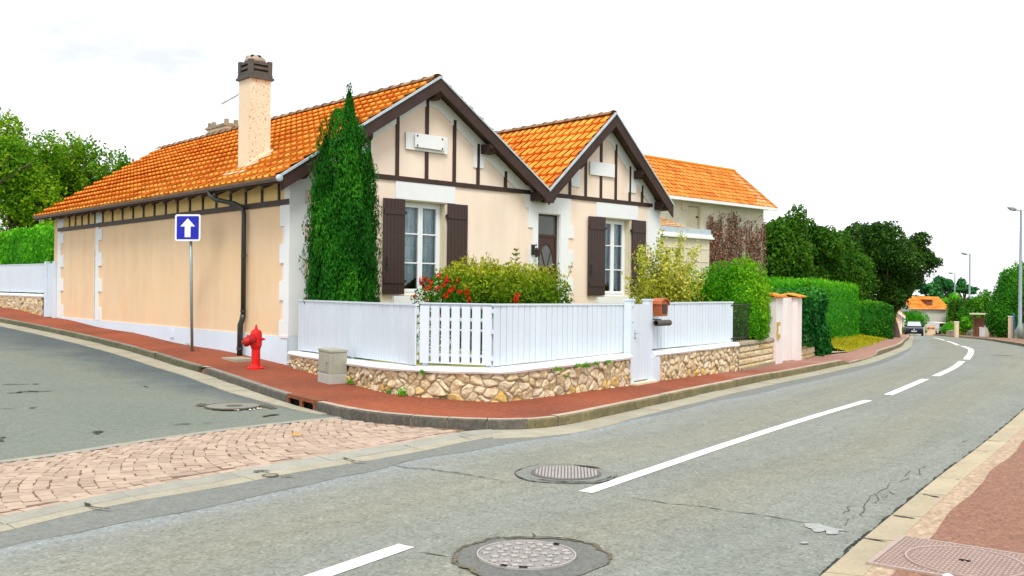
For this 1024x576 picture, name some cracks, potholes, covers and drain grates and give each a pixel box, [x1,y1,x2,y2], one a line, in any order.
manhole cover [866,535,1024,576]
crack [819,404,1024,576]
manhole cover [477,540,576,570]
manhole cover [531,466,601,480]
drain grate [287,393,327,411]
manhole cover [204,402,262,411]
